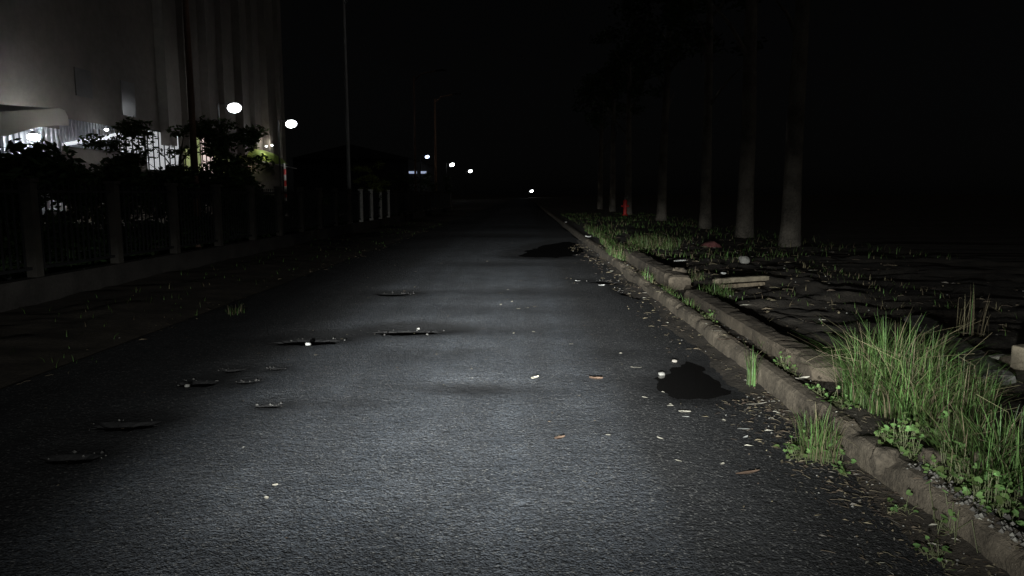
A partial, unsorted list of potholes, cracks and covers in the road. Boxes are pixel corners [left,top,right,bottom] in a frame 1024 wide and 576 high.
pothole [269,337,345,346]
pothole [176,378,220,387]
pothole [37,450,107,465]
pothole [91,419,164,432]
